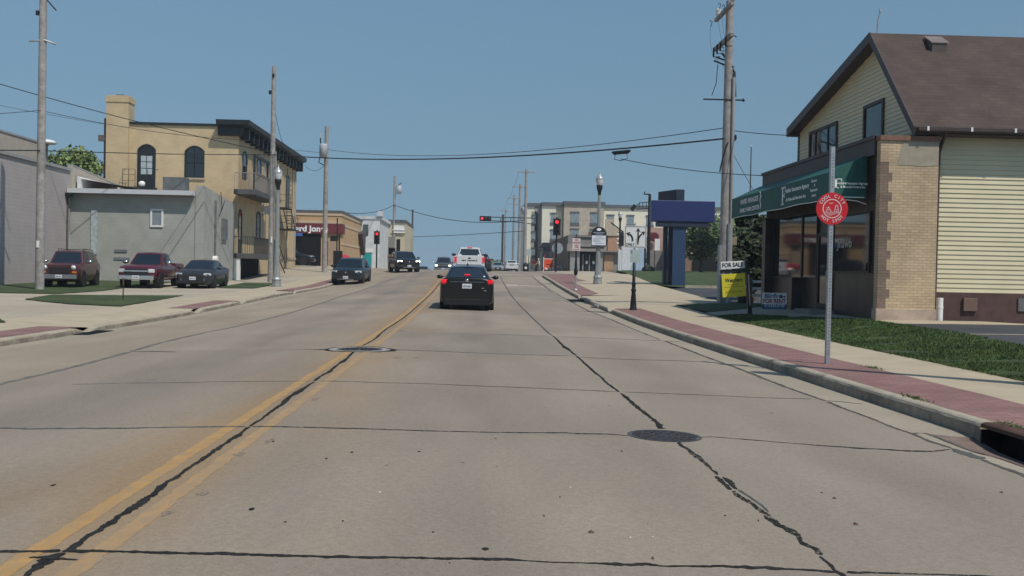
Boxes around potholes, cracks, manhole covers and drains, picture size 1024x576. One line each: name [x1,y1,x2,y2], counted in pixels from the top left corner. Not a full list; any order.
manhole cover [627,430,702,442]
drain grate [980,422,1024,462]
